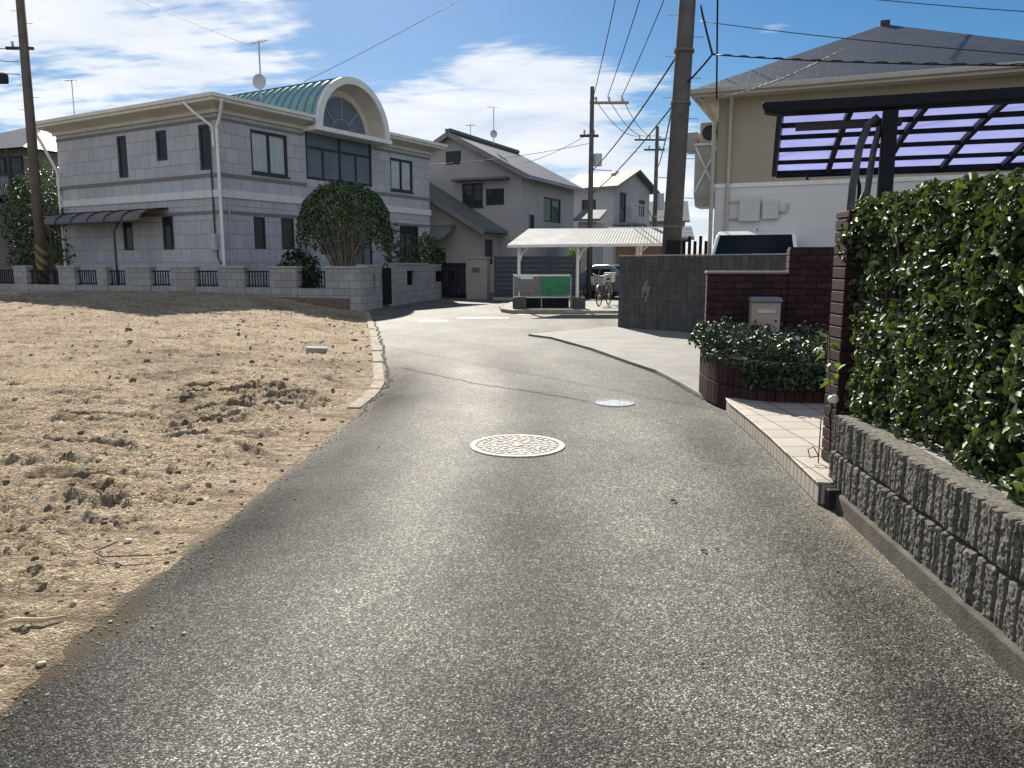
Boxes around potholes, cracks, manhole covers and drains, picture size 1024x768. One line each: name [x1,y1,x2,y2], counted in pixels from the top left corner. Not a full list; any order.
manhole cover [470,434,565,458]
crack [411,369,585,401]
manhole cover [595,399,635,407]
